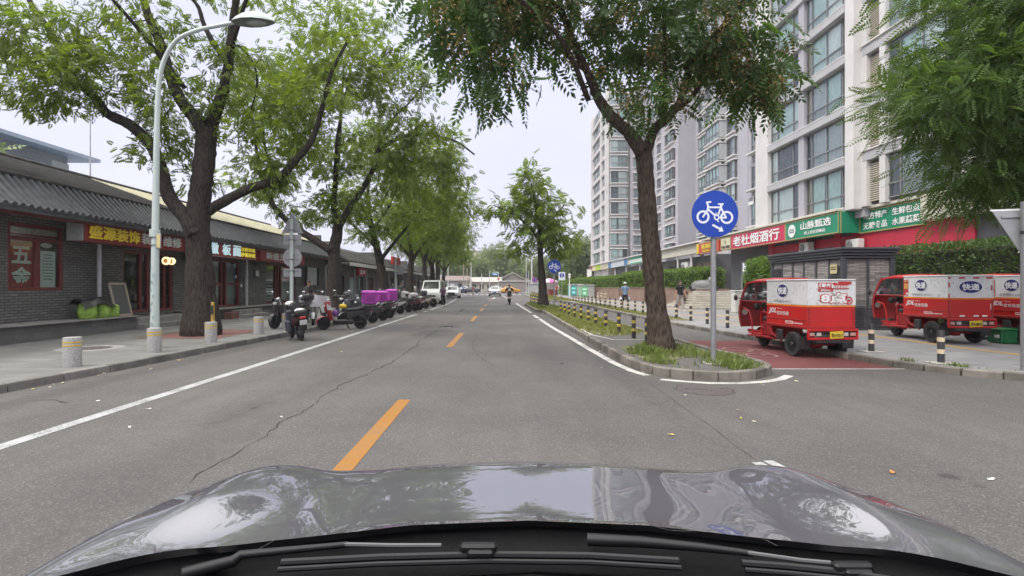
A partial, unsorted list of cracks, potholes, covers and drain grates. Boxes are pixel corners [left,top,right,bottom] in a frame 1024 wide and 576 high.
crack [190,302,475,482]
manhole cover [674,384,737,396]
